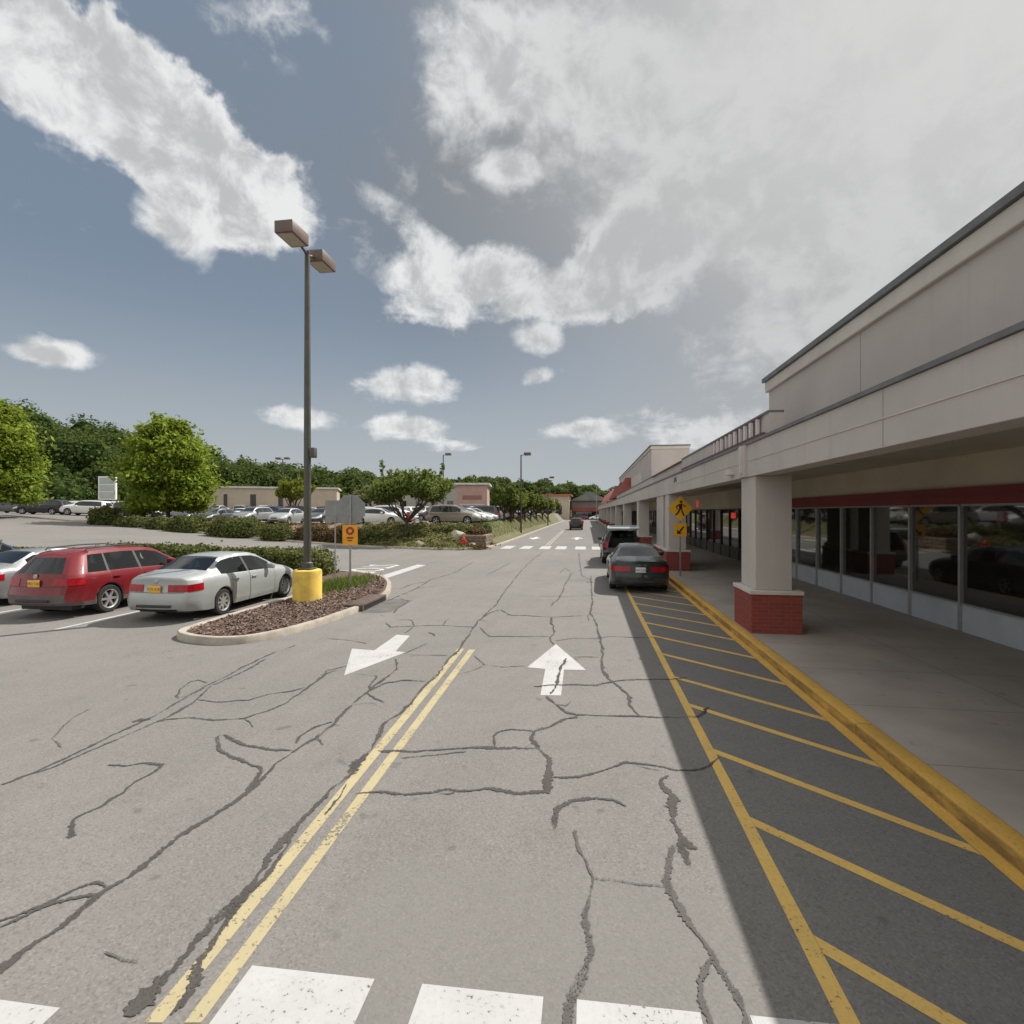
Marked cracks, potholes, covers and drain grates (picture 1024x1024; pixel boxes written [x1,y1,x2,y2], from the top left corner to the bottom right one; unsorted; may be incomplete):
crack [0,553,750,1024]
